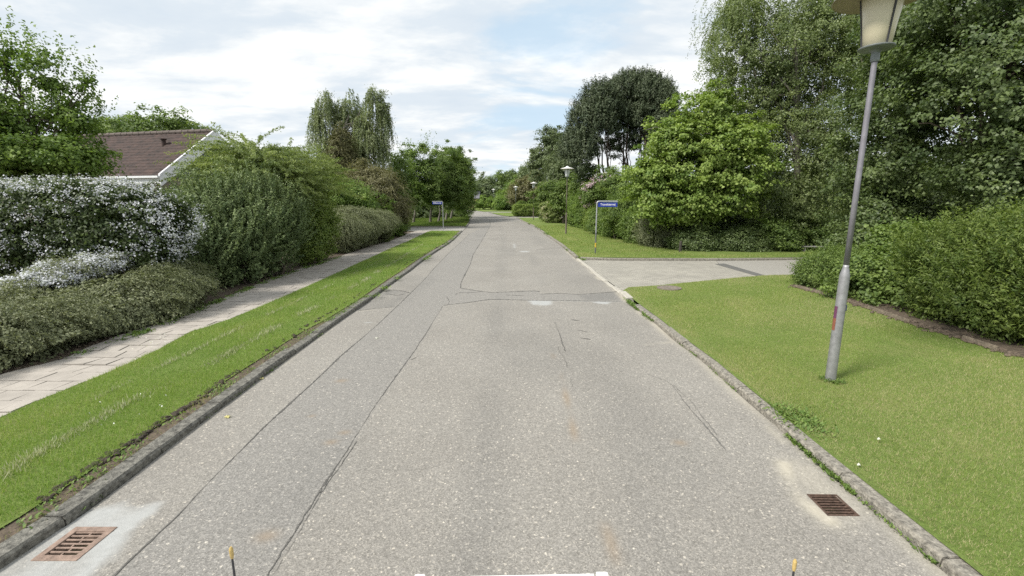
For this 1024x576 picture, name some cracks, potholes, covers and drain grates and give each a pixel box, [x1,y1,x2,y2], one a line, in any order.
crack [267,215,622,576]
drain grate [31,527,117,561]
drain grate [807,494,860,516]
crack [651,375,726,450]
